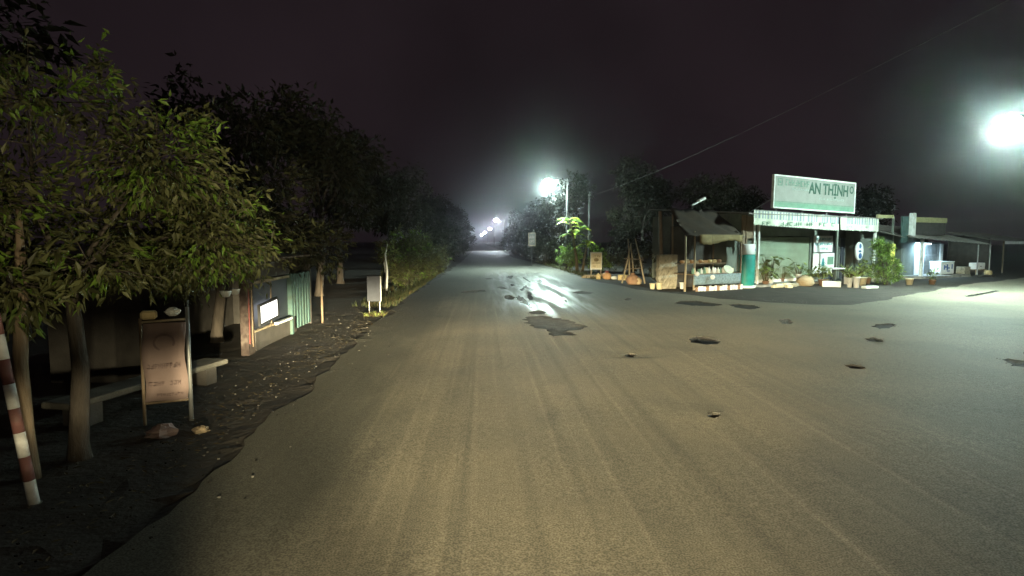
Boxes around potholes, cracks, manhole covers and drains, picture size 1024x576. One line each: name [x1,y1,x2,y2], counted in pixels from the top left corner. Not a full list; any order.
pothole [522,313,588,337]
pothole [684,336,721,345]
pothole [996,358,1024,367]
